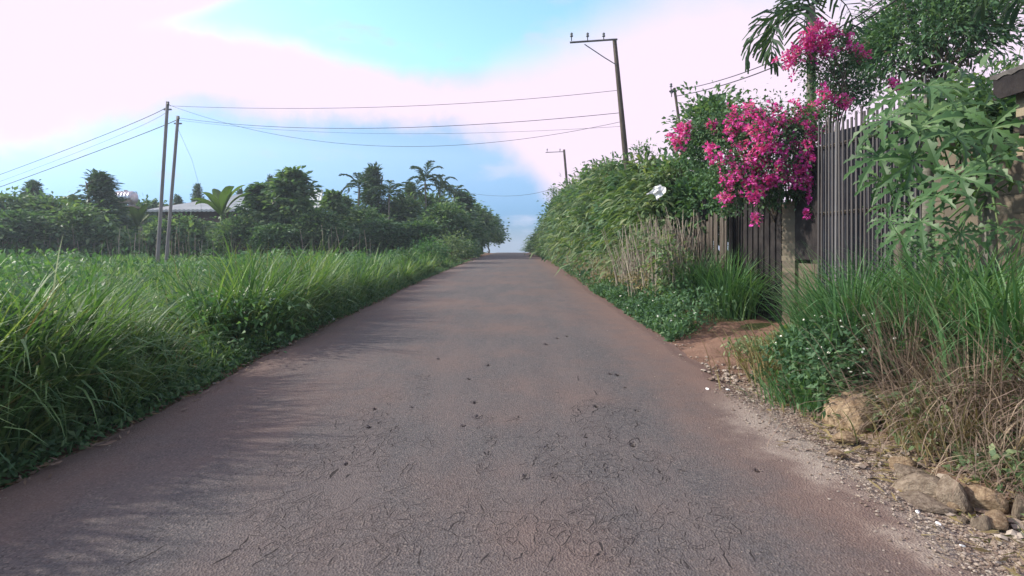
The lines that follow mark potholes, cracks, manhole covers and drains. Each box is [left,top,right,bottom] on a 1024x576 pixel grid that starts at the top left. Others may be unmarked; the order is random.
crack [210,373,758,569]
